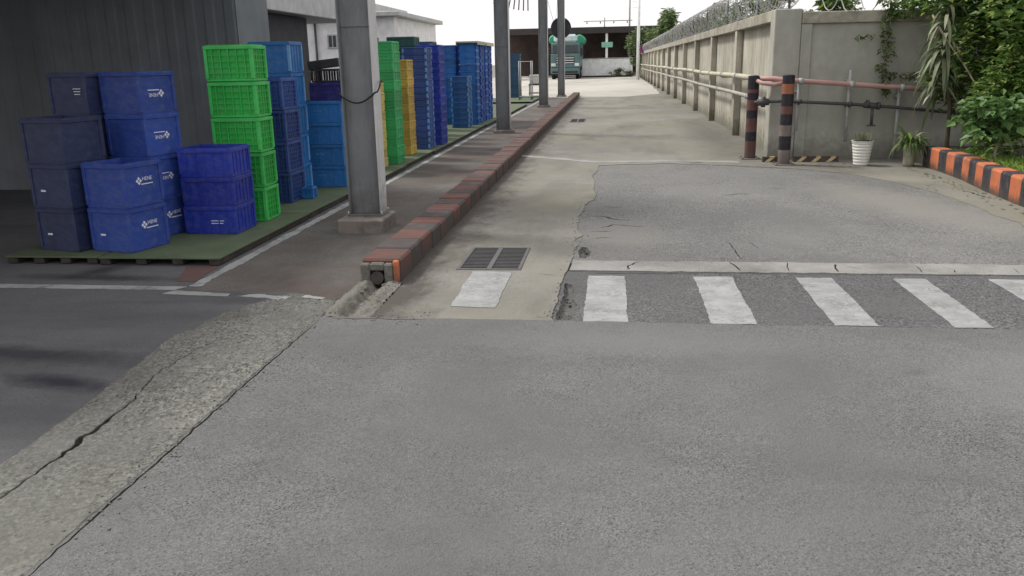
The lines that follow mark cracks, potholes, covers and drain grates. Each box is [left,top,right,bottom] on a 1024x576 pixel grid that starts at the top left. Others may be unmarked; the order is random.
pothole [556,285,577,320]
crack [0,320,319,575]
drain grate [456,247,531,270]
